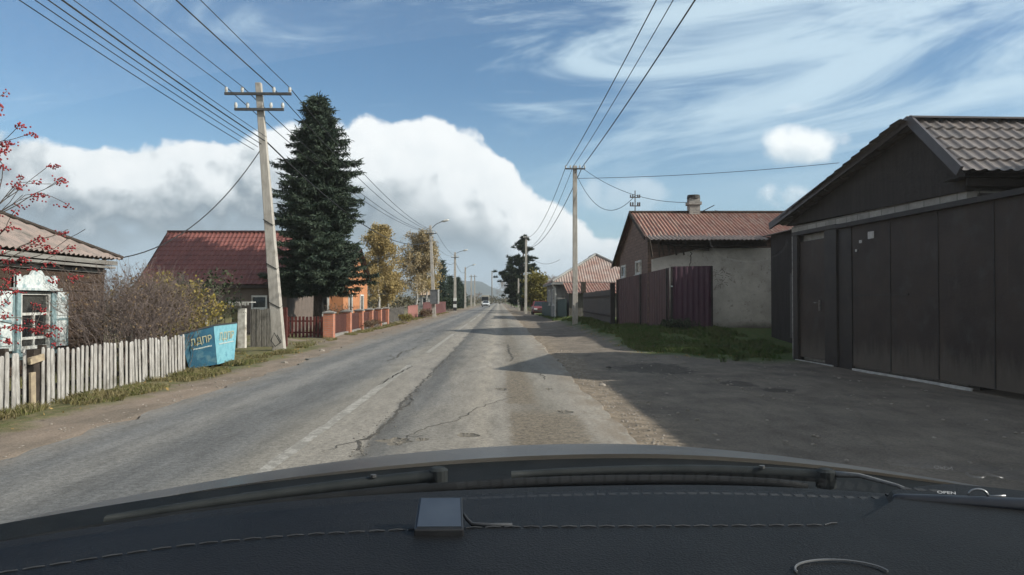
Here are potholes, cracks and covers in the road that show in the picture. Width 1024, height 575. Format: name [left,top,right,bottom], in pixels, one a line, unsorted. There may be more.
crack [402,396,514,441]
